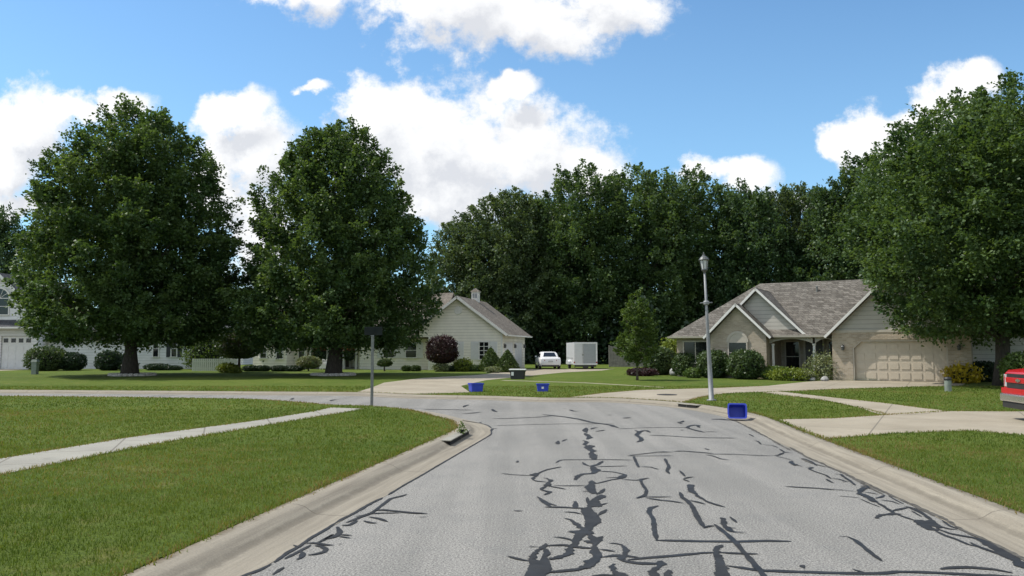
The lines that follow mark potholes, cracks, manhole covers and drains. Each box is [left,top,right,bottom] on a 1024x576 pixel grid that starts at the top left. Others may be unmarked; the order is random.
drain grate [441,429,470,445]
